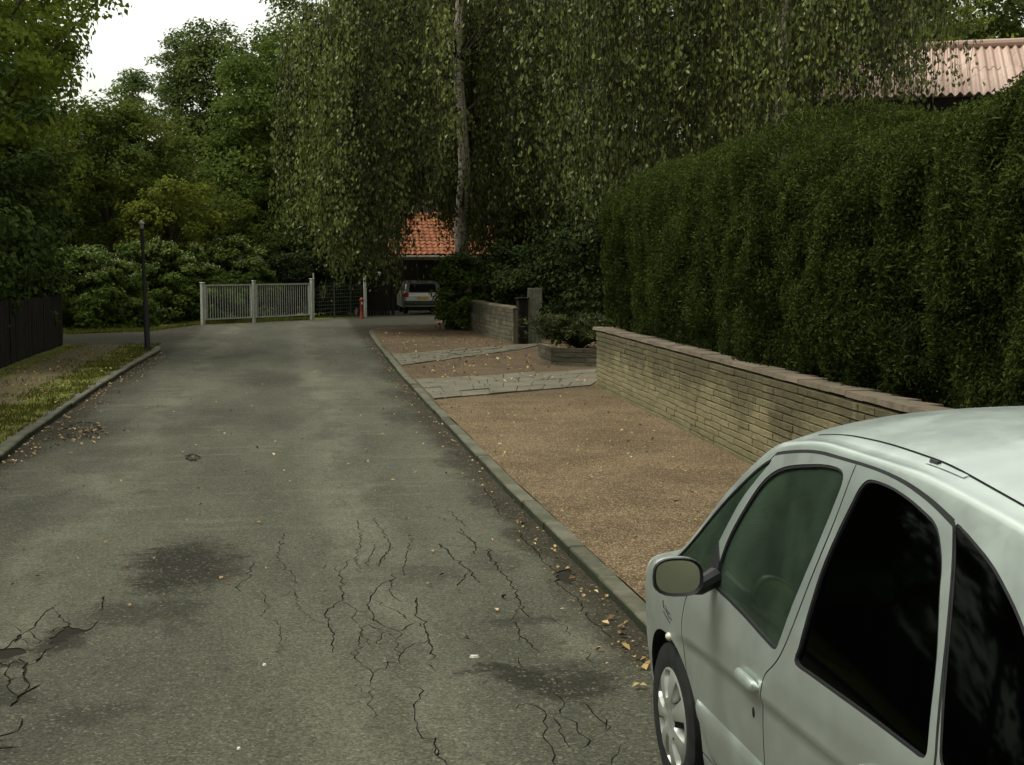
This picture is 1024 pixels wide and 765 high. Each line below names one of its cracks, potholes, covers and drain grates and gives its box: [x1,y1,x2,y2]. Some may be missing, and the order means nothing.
crack [236,533,326,654]
crack [438,510,621,765]
crack [324,519,437,719]
pothole [63,421,103,440]
crack [0,596,105,749]
crack [413,687,448,765]
